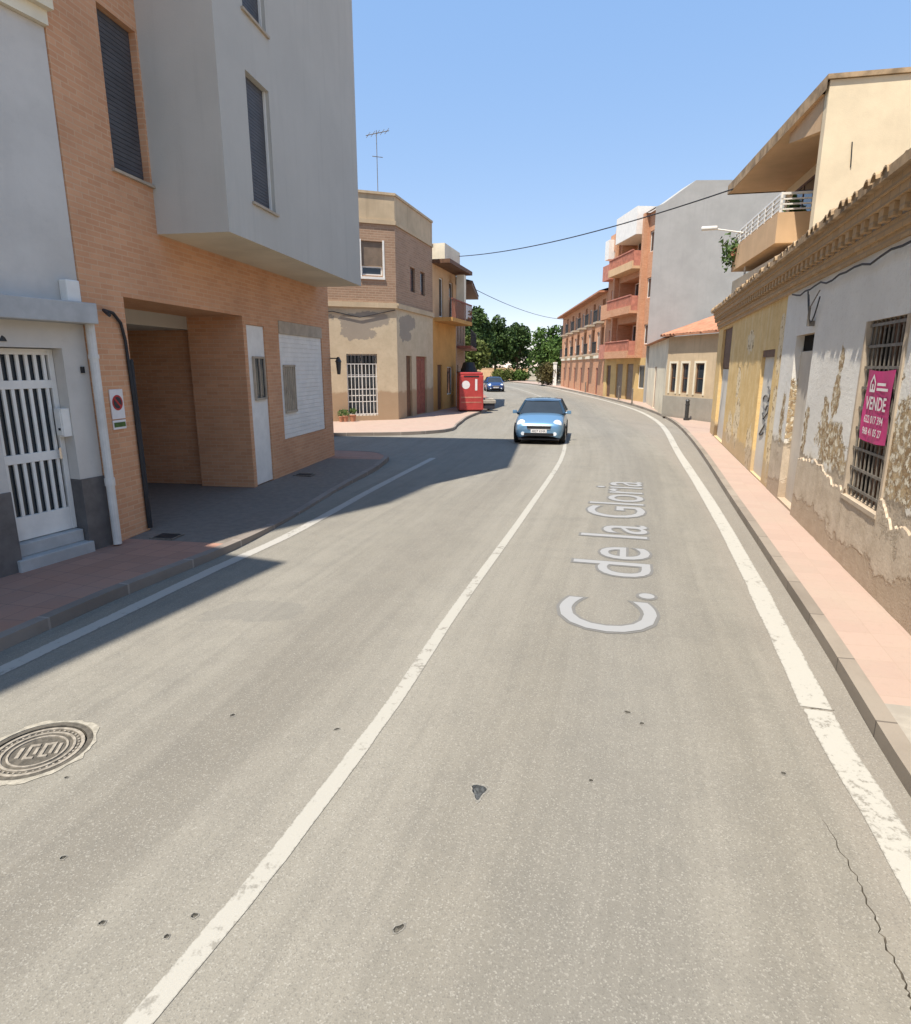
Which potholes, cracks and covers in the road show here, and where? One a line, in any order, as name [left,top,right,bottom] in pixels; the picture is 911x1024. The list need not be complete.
manhole cover [0,720,100,786]
pothole [470,783,490,804]
crack [824,822,911,1010]
